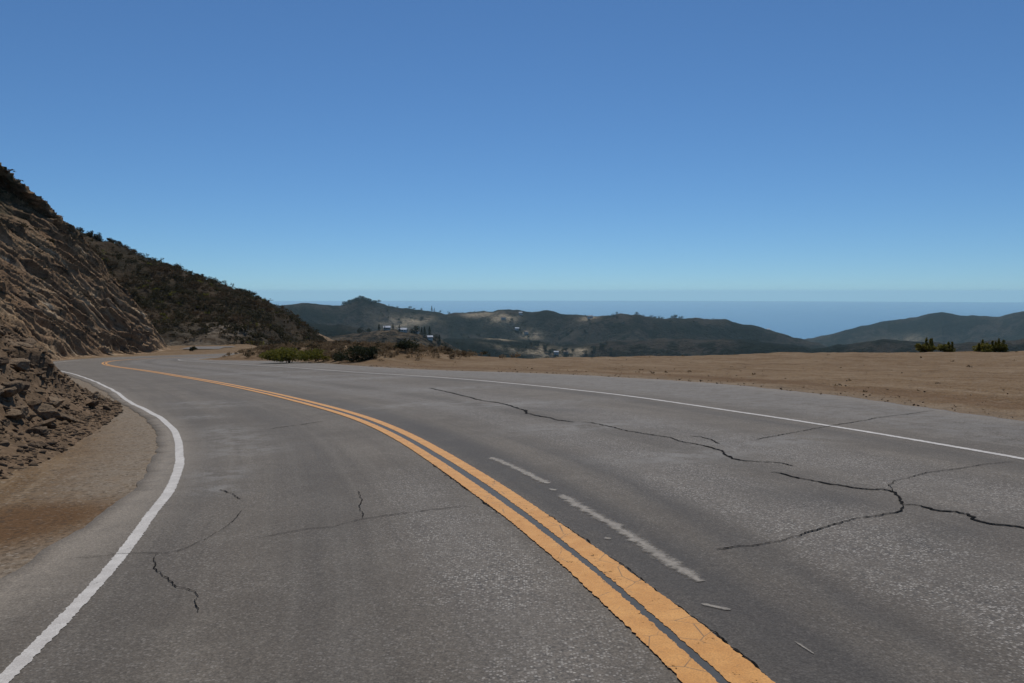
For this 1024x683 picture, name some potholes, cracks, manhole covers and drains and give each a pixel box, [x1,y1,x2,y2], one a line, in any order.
crack [431,388,572,422]
crack [78,489,241,611]
crack [269,464,497,536]
crack [590,422,1024,549]
